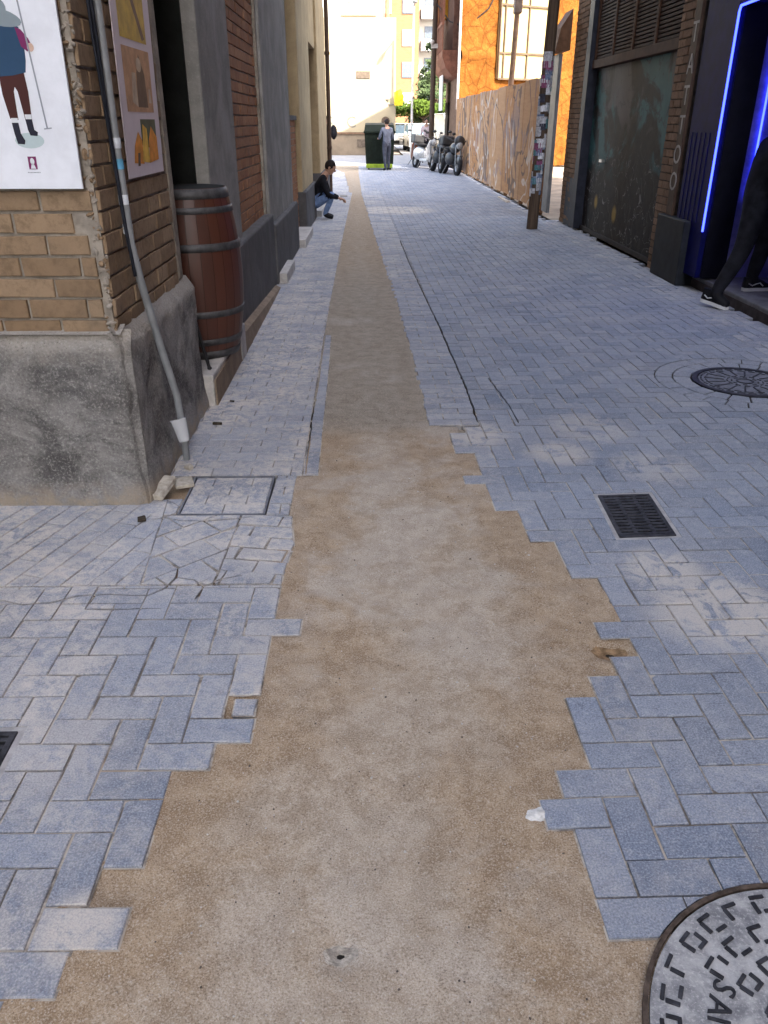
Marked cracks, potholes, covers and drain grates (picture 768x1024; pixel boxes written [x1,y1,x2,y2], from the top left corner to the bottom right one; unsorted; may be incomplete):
manhole cover [177,476,275,516]
pothole [323,945,359,968]
drain grate [593,492,682,540]
manhole cover [654,359,768,410]
drain grate [0,727,27,779]
manhole cover [642,883,768,1024]
